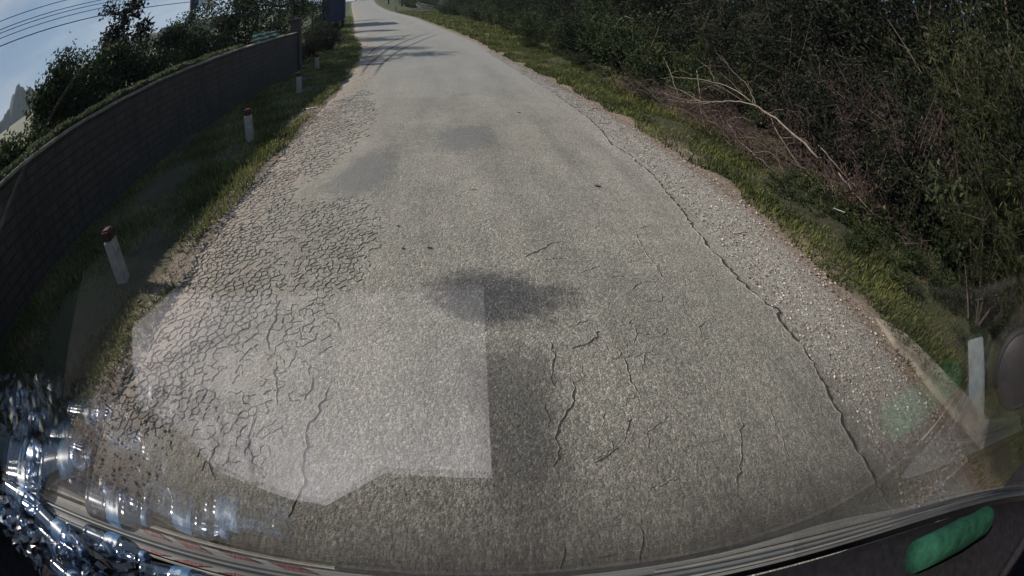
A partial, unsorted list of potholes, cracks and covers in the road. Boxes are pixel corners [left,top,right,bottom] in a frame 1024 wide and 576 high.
crack [103,90,384,517]
crack [510,65,869,490]
